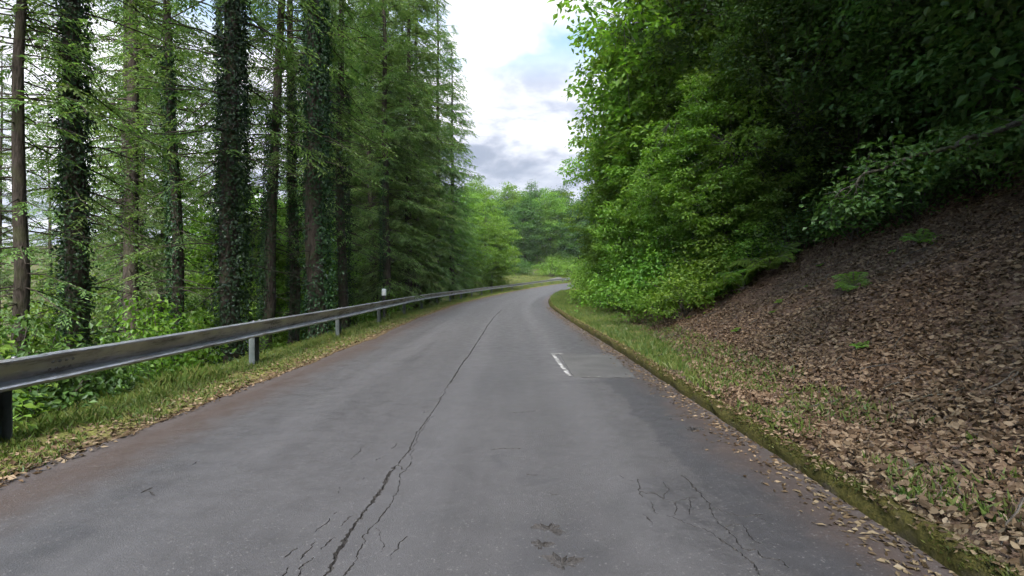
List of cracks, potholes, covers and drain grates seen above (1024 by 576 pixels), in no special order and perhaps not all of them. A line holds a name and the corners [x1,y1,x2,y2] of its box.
crack [620,475,789,575]
crack [282,312,499,576]
pothole [531,523,566,536]
pothole [540,552,585,570]
pothole [531,539,556,550]
